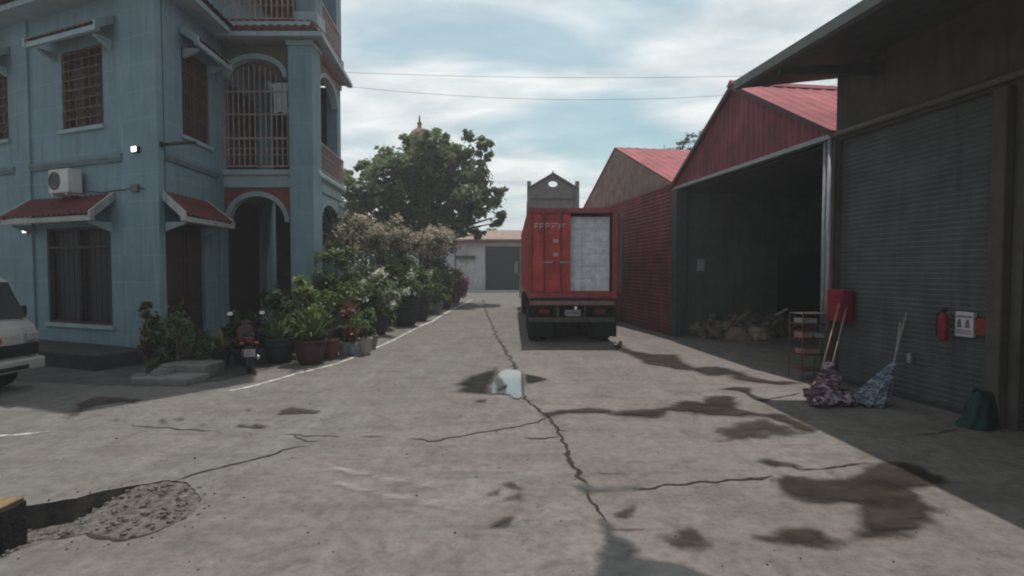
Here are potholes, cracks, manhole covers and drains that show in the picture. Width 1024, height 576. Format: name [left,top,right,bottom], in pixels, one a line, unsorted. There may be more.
crack [410,395,772,522]
crack [483,299,519,370]
pothole [0,479,230,559]
crack [177,434,339,480]
